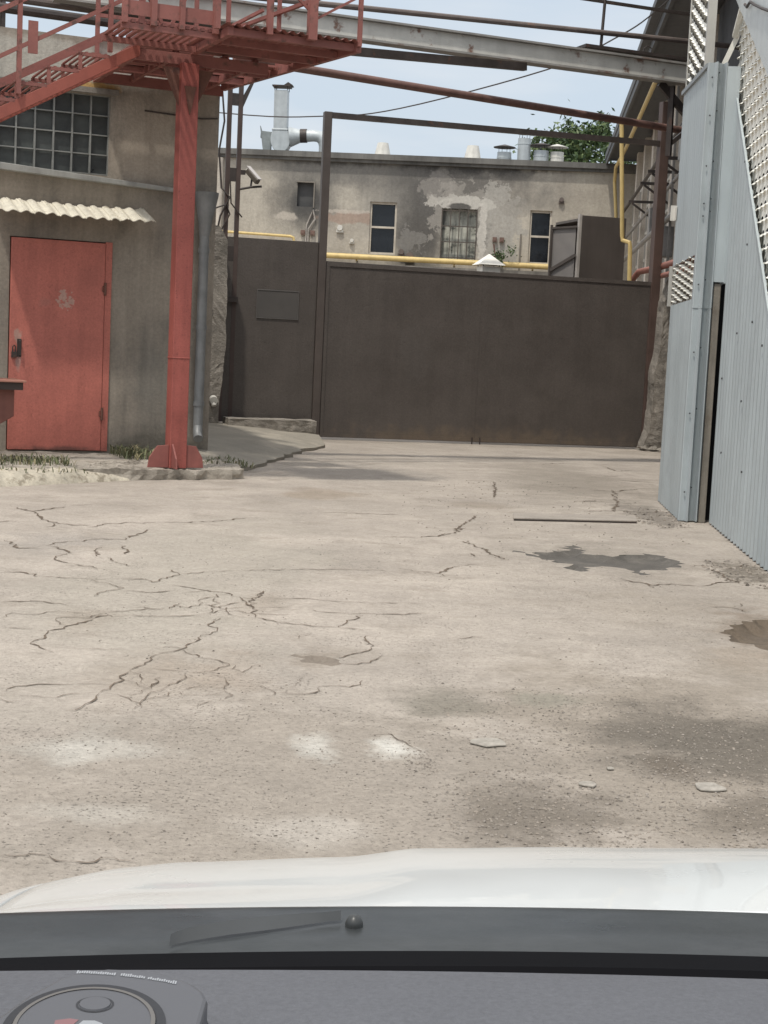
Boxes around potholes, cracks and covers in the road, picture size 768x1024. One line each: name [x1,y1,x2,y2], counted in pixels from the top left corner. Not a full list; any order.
crack [1,504,505,710]
crack [492,463,658,512]
crack [8,853,133,863]
crack [628,565,754,612]
